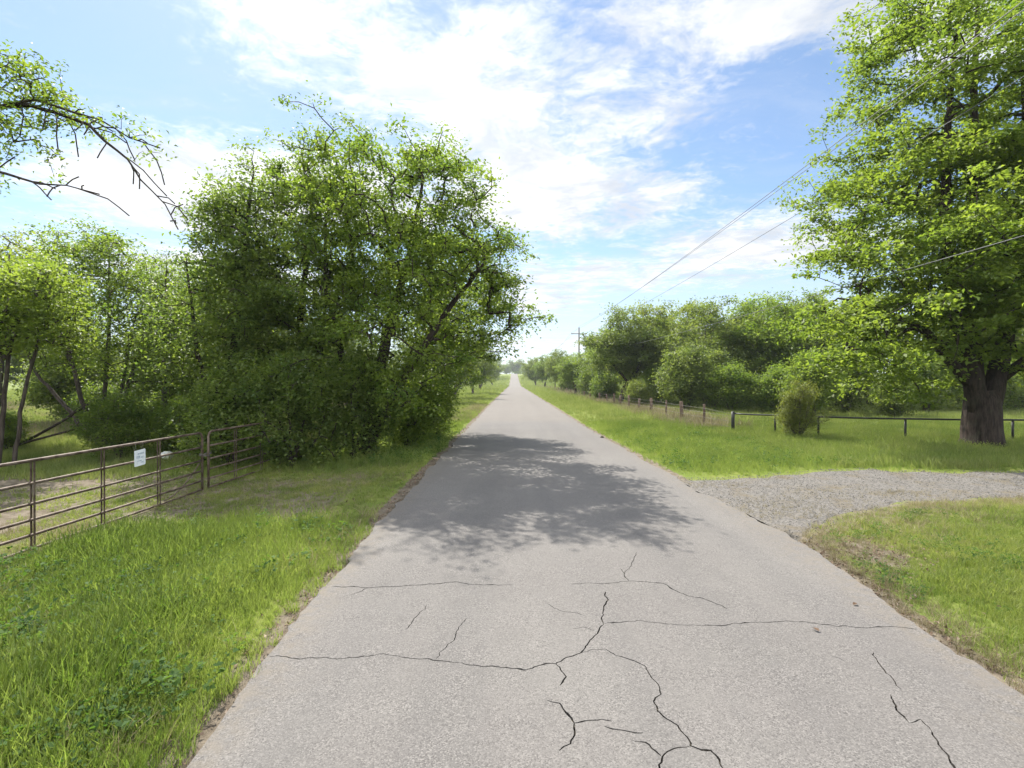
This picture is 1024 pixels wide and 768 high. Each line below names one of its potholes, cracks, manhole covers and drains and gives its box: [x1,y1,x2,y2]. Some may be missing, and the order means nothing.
crack [872,653,956,768]
crack [270,556,910,768]
